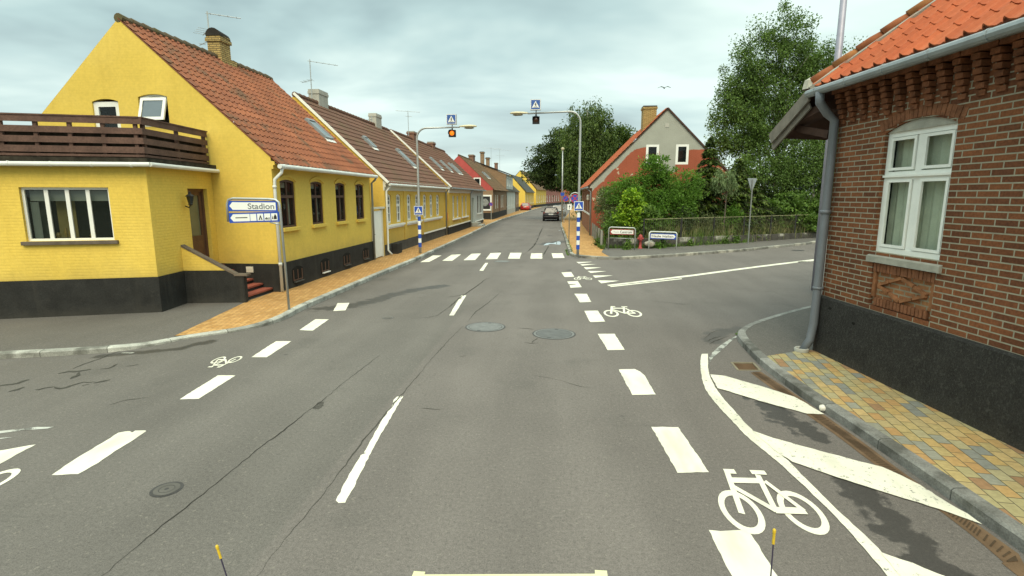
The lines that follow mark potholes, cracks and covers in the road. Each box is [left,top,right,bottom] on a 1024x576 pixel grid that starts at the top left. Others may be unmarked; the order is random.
drain grate [730,362,762,371]
manhole cover [149,481,184,497]
crack [0,364,138,392]
manhole cover [465,322,505,332]
manhole cover [532,328,576,339]
